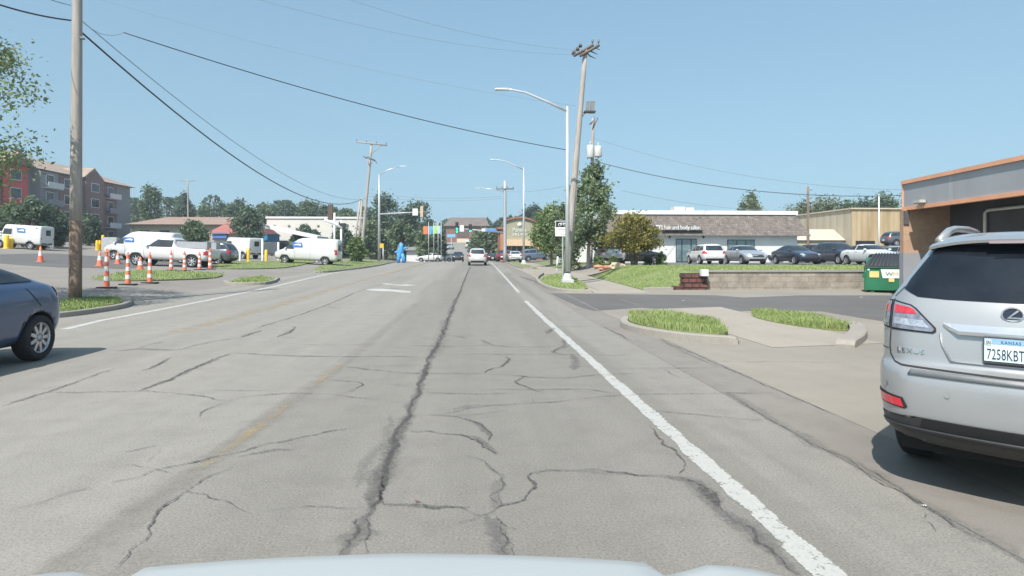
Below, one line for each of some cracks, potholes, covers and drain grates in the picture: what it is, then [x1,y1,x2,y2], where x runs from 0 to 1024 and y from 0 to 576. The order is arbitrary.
crack [22,277,796,573]
